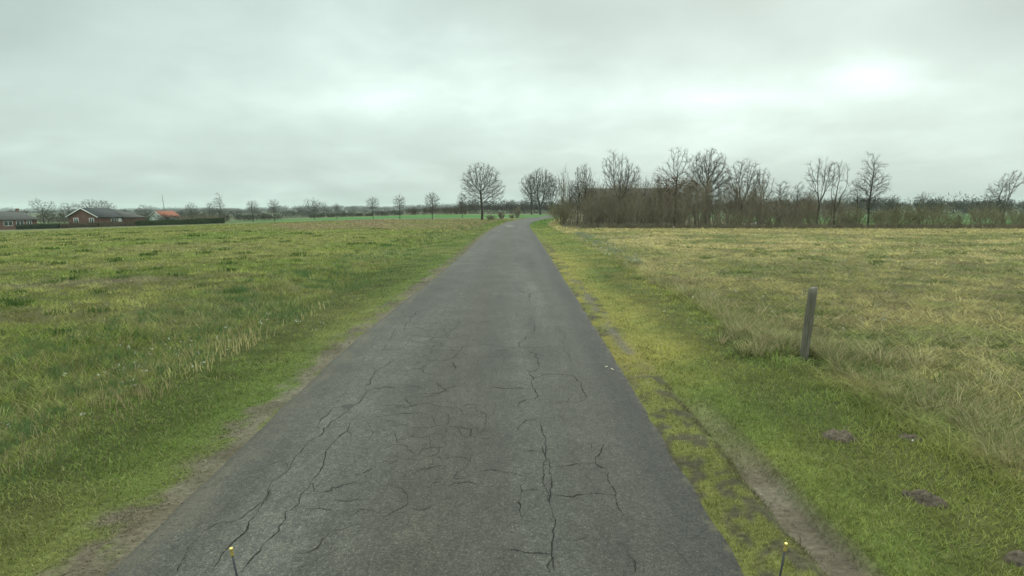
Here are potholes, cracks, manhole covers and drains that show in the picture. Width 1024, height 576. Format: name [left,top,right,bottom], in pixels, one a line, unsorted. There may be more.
crack [177,312,519,572]
crack [486,317,587,403]
crack [505,418,624,572]
